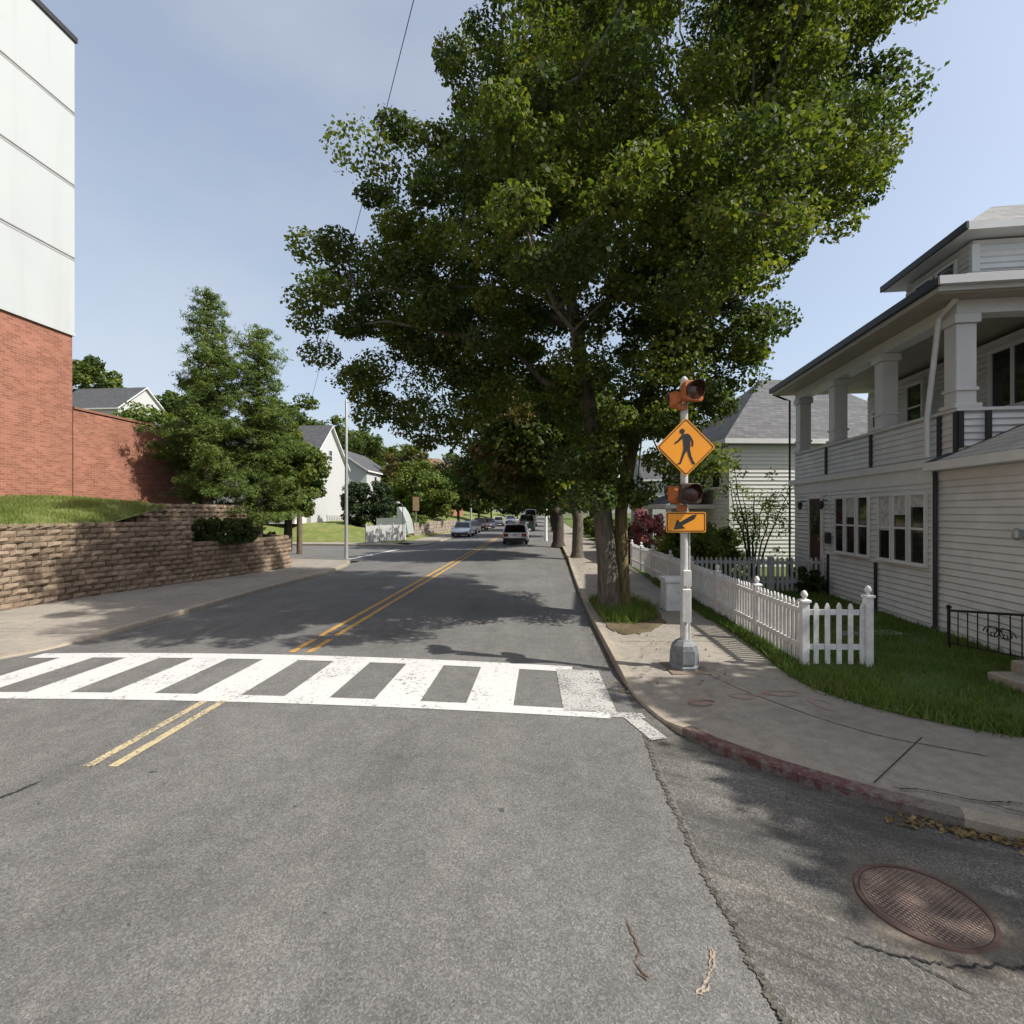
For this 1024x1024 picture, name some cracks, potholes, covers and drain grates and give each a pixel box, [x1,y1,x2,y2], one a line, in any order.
manhole cover [853,864,1002,954]
crack [0,780,42,798]
crack [844,936,1024,1000]
